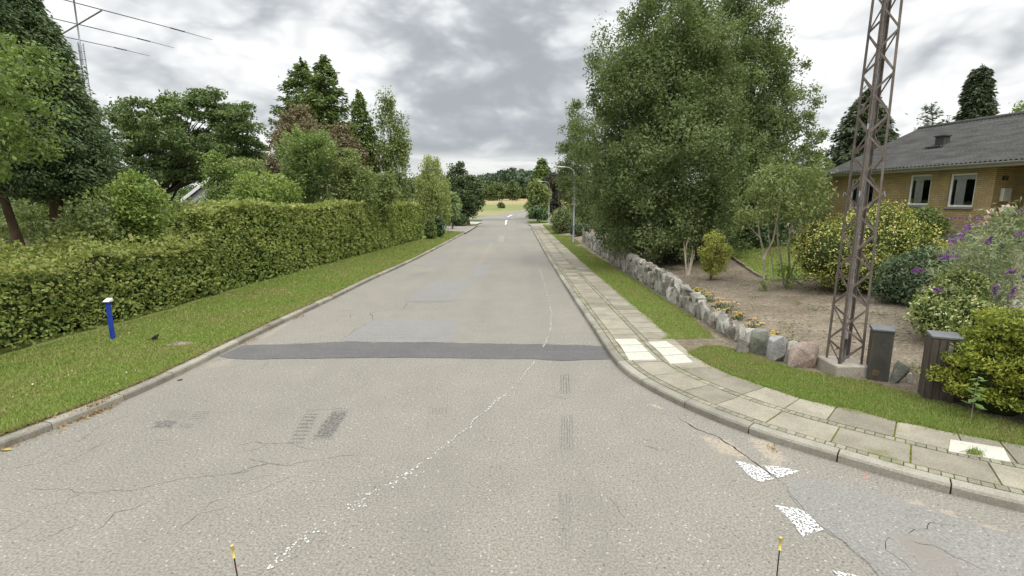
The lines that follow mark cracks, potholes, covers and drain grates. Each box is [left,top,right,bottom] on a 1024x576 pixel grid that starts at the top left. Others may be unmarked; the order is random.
crack [6,442,352,540]
crack [681,420,785,484]
